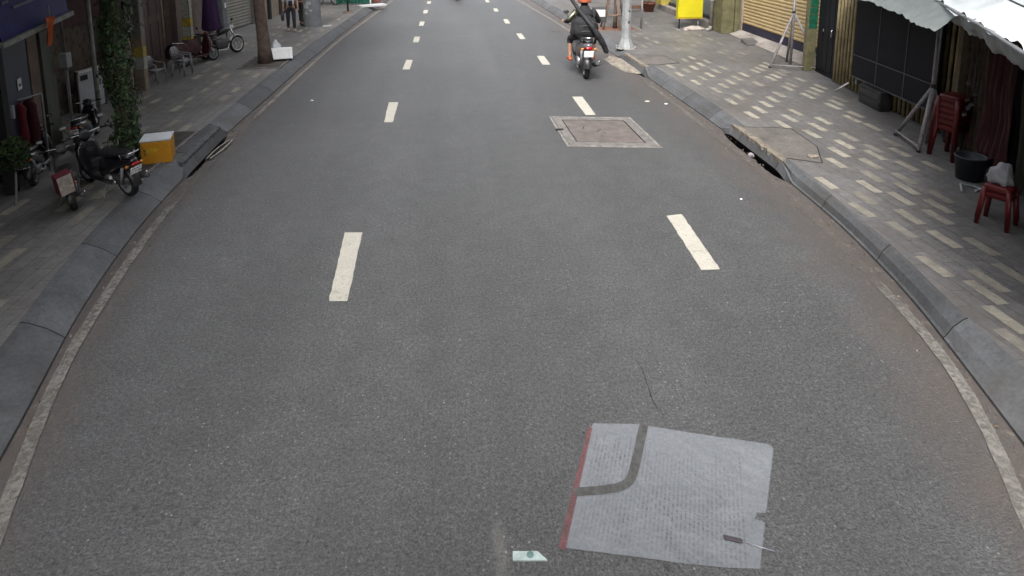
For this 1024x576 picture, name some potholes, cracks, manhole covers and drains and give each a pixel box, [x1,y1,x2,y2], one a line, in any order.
manhole cover [549,116,662,148]
